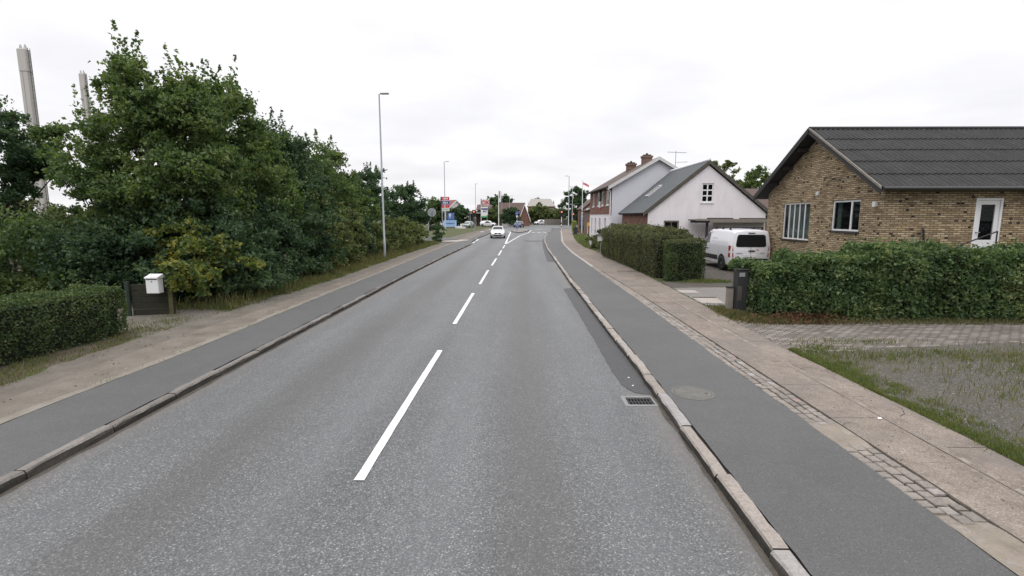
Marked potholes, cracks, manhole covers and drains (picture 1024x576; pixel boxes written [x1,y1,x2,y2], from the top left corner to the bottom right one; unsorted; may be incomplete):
drain grate [620,396,658,406]
manhole cover [671,386,715,400]
